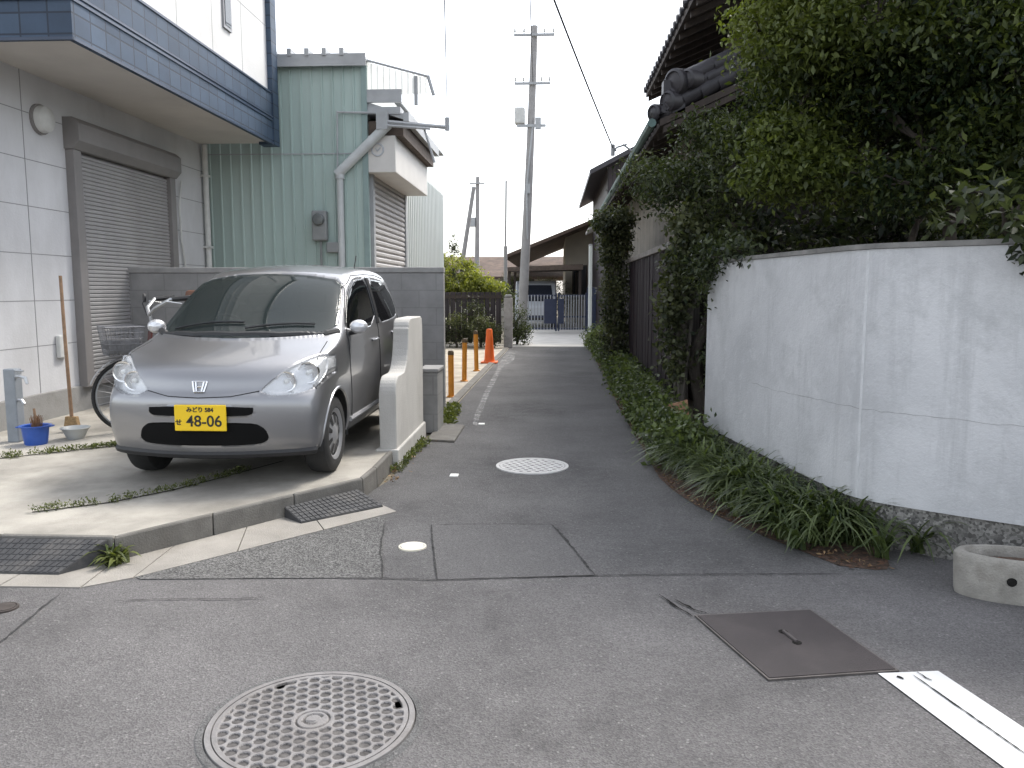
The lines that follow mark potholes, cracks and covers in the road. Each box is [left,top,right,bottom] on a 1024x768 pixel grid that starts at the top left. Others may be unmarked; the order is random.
utility cover [0,602,20,614]
manhole cover [694,609,899,682]
manhole cover [496,458,569,475]
manhole cover [203,671,416,768]
